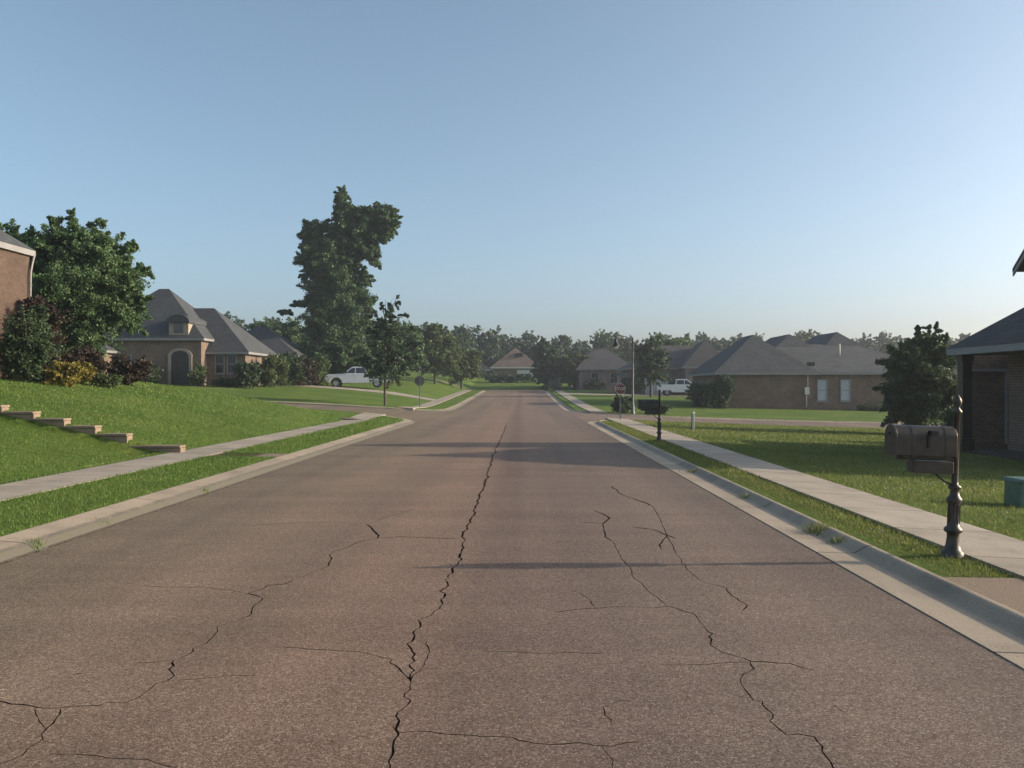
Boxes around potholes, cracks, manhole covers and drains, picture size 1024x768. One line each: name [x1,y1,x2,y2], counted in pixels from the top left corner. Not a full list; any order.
crack [560,510,834,768]
crack [0,425,633,768]
crack [611,486,748,611]
